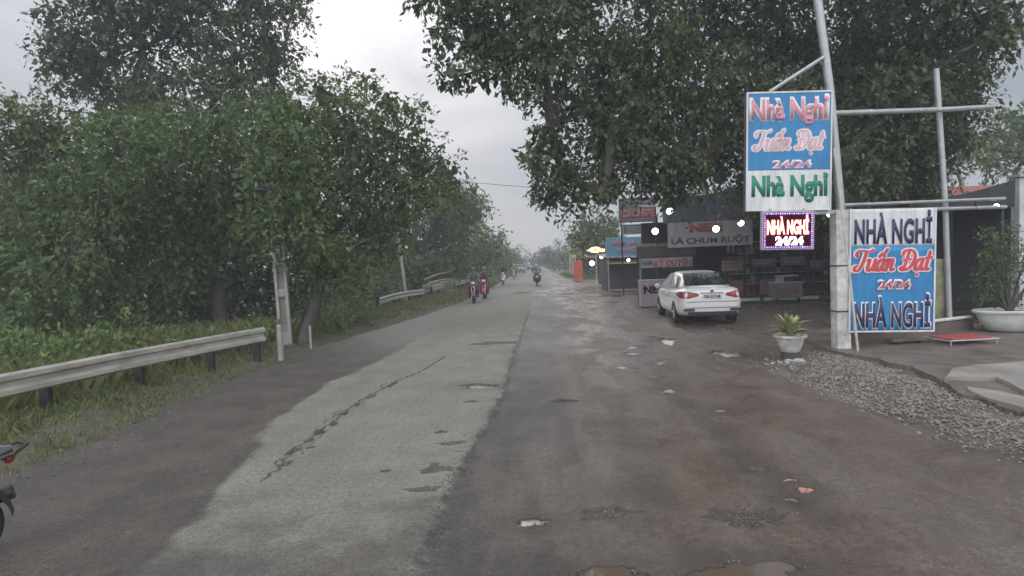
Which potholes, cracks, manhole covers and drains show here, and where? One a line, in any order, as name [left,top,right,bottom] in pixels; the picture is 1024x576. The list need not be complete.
pothole [710,350,739,358]
pothole [513,516,553,527]
crack [245,356,446,483]
pothole [418,465,456,474]
pothole [656,337,679,346]
pothole [689,504,798,531]
pothole [573,504,650,522]
pothole [678,558,806,576]
